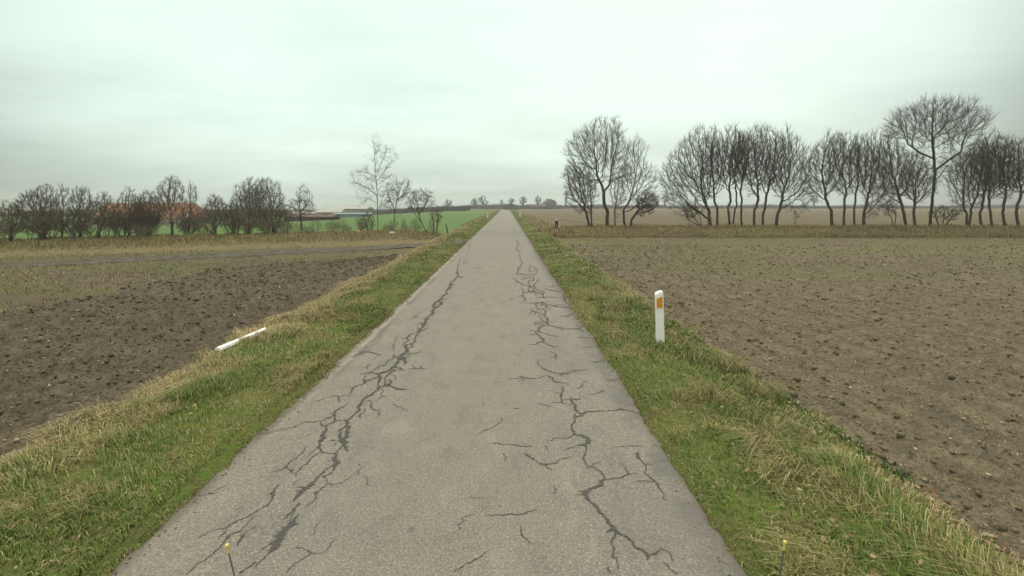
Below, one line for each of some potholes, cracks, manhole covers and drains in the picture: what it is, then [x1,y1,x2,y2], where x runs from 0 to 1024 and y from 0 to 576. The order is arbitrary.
crack [478,240,678,574]
crack [187,242,470,574]
